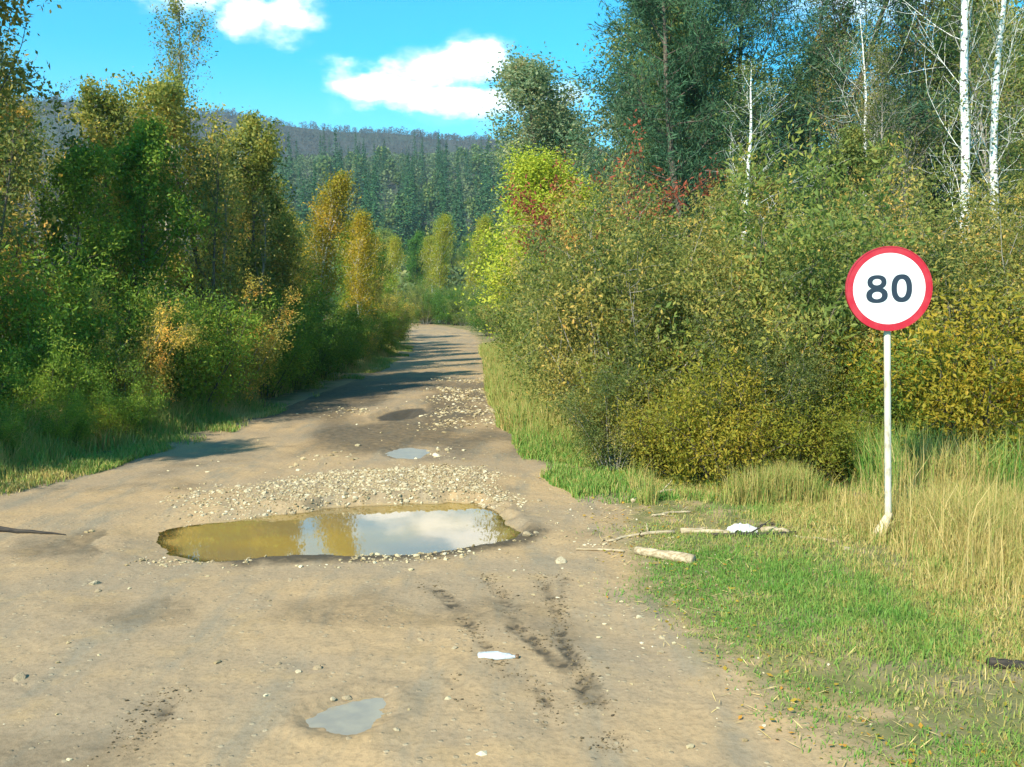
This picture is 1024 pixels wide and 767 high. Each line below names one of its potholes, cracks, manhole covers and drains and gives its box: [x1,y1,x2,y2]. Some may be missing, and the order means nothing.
pothole [158,499,523,562]
pothole [375,408,429,421]
pothole [305,696,389,736]
